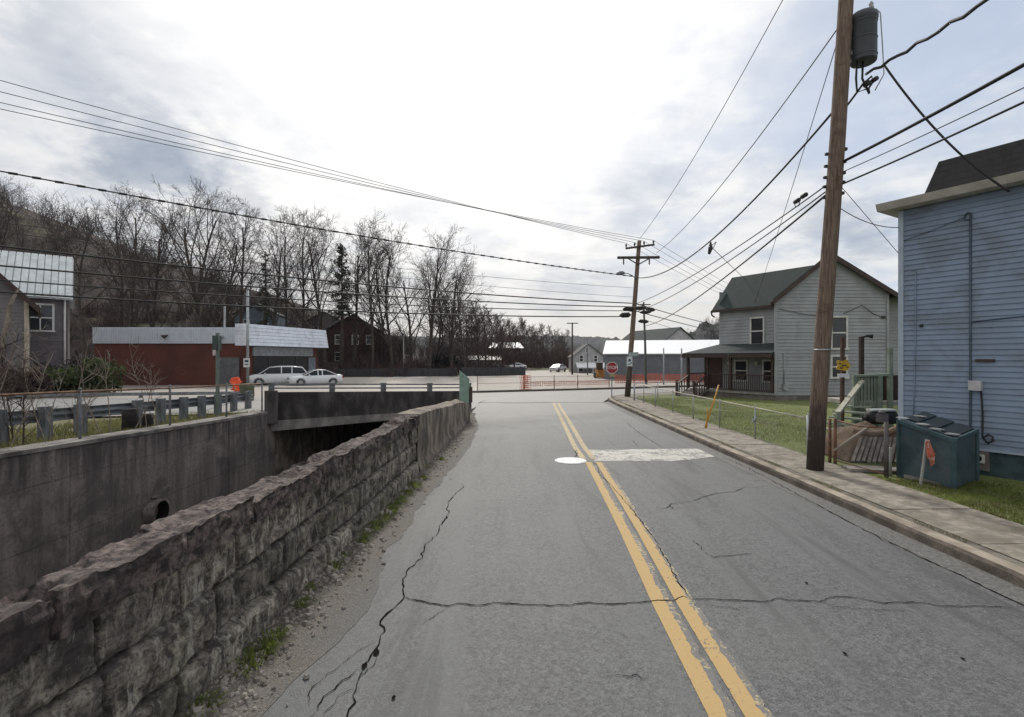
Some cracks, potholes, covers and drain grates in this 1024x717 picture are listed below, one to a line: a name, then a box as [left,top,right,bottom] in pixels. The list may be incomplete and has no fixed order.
crack [308,486,690,717]
crack [666,461,1024,611]
